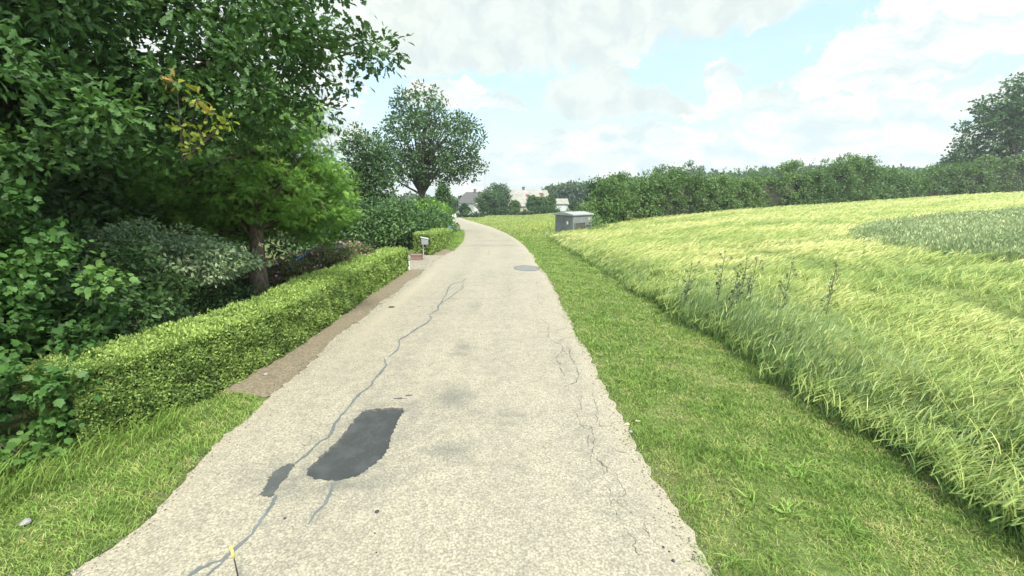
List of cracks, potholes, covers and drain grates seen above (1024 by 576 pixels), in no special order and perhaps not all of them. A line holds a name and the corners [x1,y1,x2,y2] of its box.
crack [533,283,655,553]
